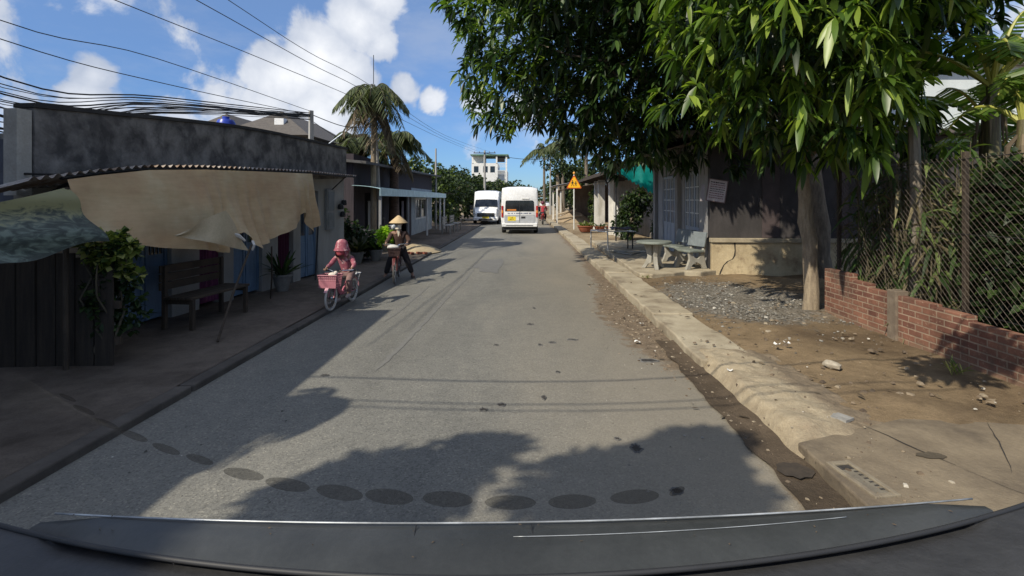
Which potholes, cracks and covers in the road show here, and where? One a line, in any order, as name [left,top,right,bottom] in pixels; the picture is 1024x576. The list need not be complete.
crack [987,422,1012,472]
